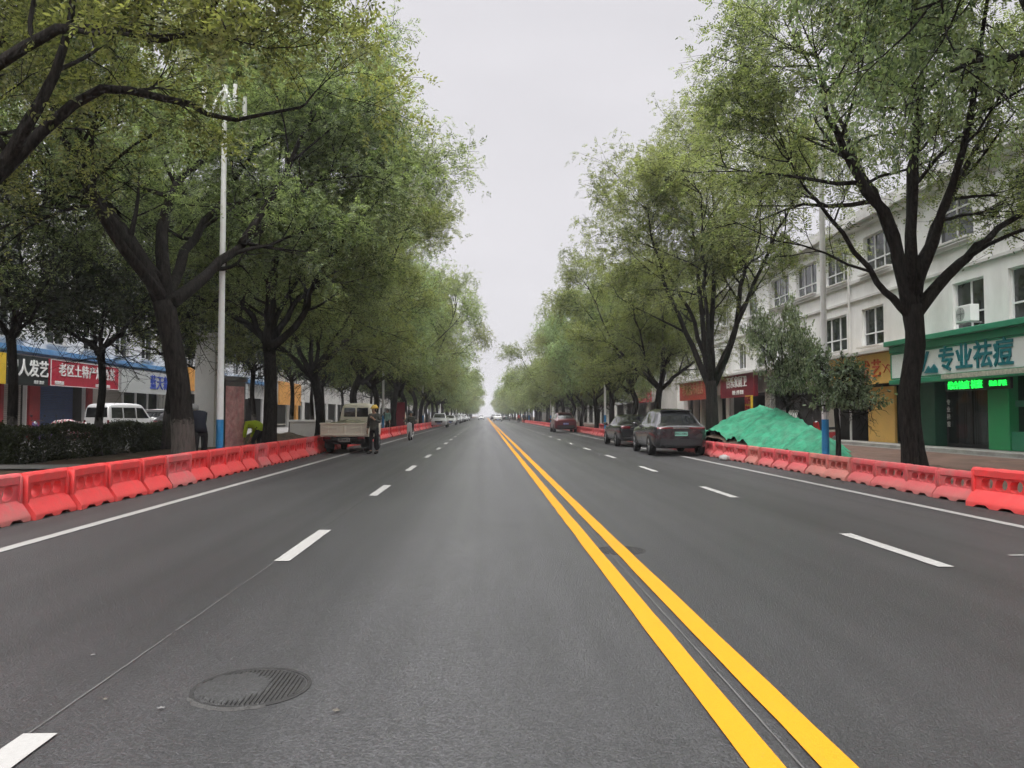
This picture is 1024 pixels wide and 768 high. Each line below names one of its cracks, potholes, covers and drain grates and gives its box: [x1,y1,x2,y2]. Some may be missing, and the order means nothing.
manhole cover [186,668,312,712]
